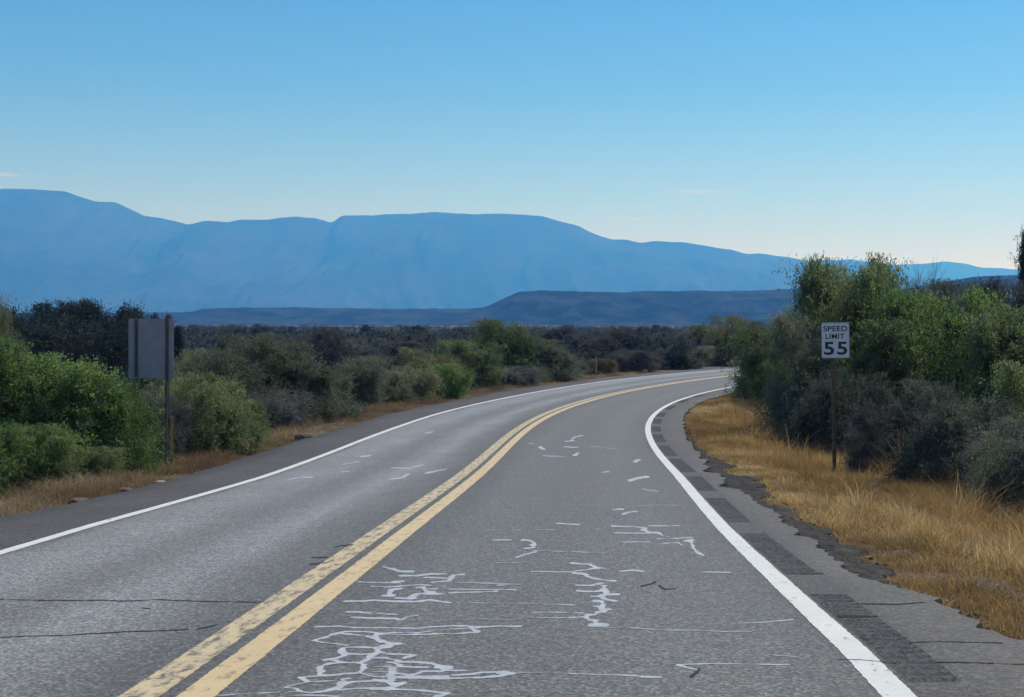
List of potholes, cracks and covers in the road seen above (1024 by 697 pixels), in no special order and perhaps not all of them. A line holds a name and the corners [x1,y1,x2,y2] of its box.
crack [15,599,254,609]
crack [217,435,794,697]
crack [7,624,218,637]
